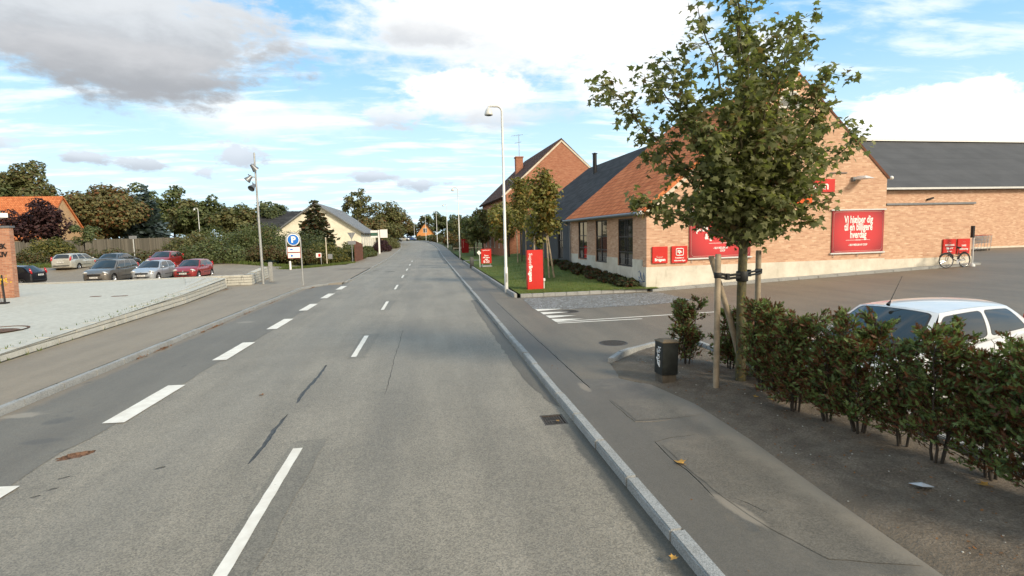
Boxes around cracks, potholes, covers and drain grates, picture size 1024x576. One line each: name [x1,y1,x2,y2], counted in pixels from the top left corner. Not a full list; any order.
drain grate [540,414,569,426]
